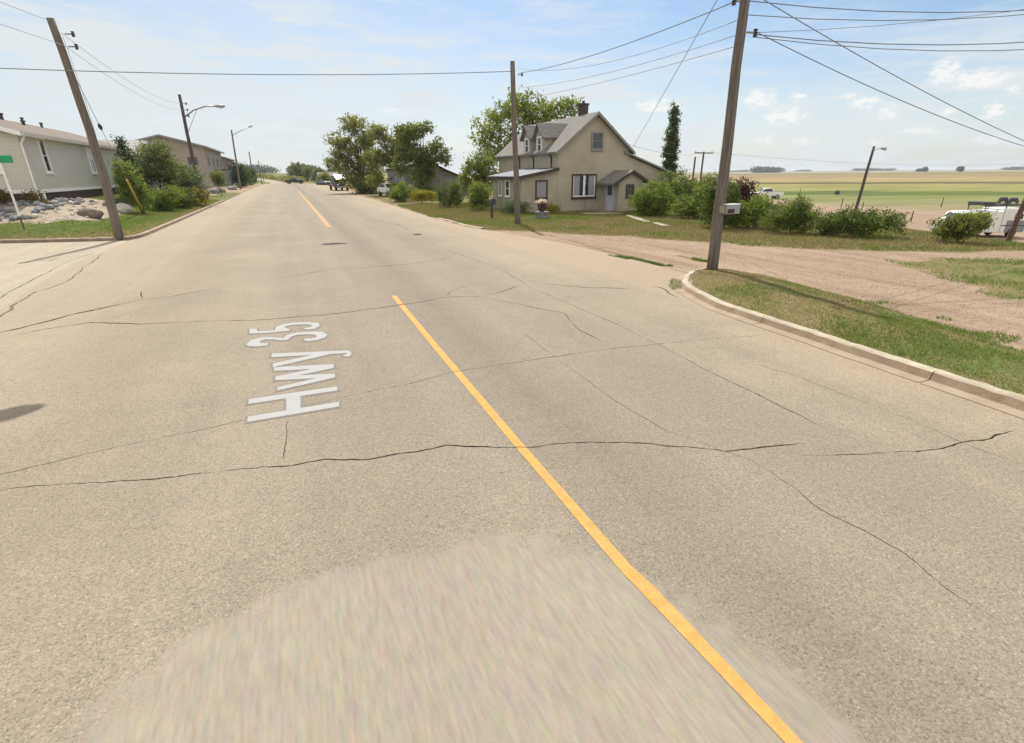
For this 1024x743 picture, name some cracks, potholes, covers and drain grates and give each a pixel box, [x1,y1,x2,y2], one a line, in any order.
crack [0,254,601,341]
crack [0,334,1012,627]
